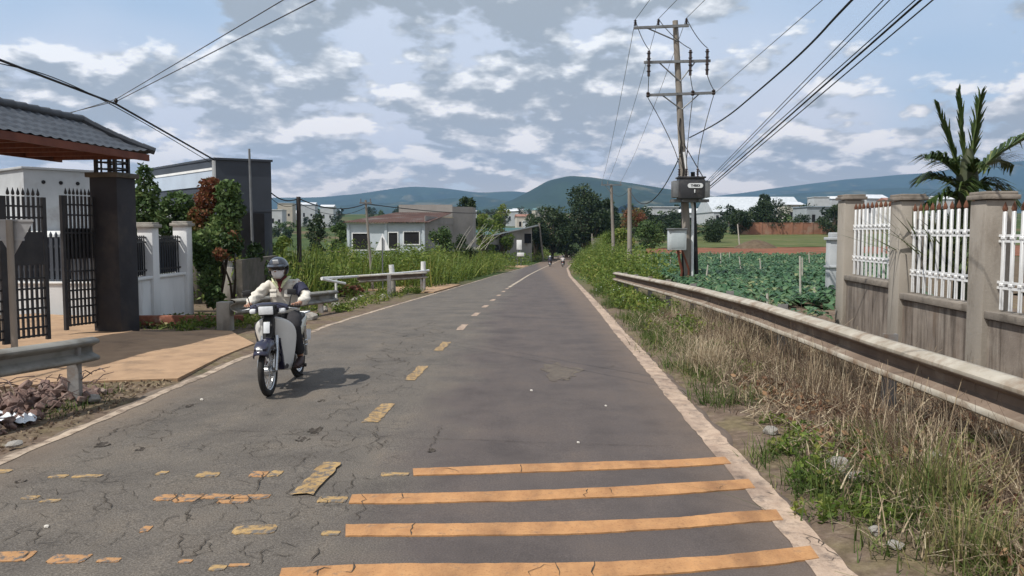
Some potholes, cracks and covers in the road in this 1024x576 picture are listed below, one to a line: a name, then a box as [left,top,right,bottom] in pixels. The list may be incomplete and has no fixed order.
crack [0,403,197,557]
crack [157,323,442,563]
